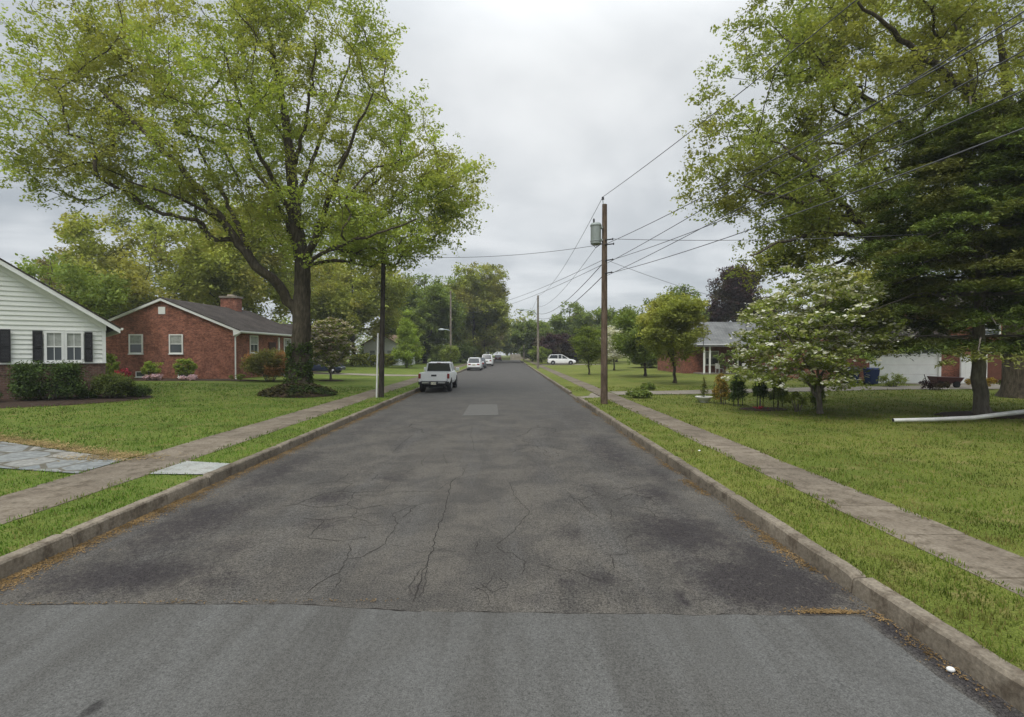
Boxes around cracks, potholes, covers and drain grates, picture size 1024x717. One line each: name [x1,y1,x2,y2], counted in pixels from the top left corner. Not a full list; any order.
crack [562,485,685,581]
crack [471,484,530,605]
crack [287,454,465,592]
crack [511,427,582,457]
